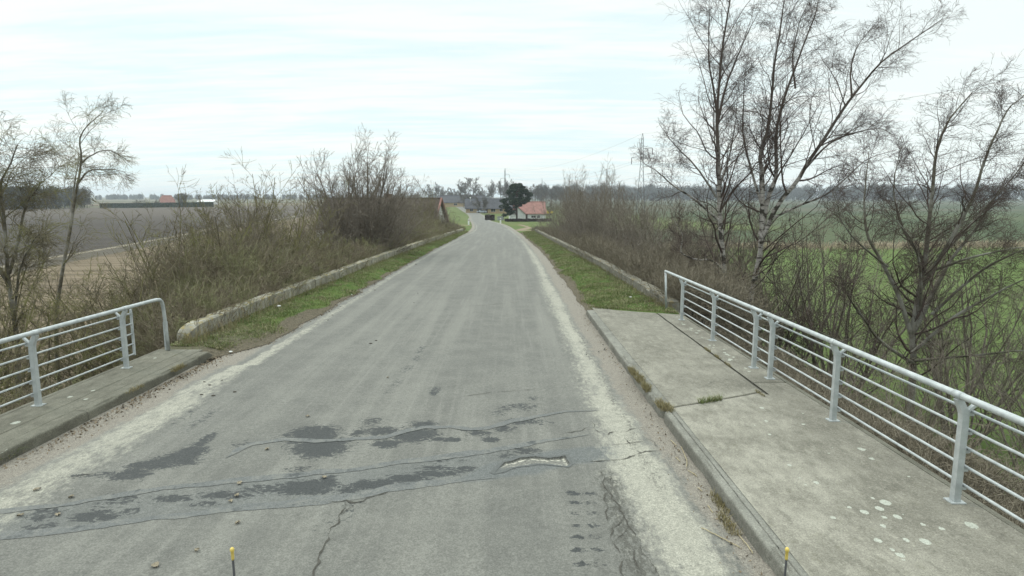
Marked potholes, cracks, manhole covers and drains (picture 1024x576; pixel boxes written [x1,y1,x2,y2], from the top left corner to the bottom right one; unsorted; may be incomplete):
crack [601,472,659,575]
pothole [490,454,574,474]
crack [312,492,387,576]
